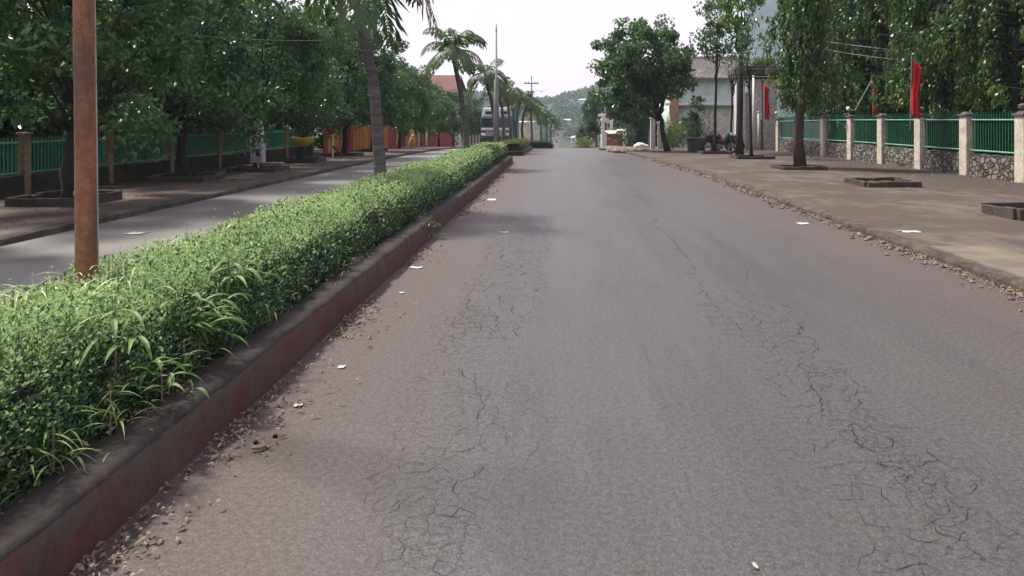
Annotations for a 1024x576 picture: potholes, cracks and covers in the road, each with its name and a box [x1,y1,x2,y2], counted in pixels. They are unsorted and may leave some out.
crack [352,347,547,575]
crack [430,211,556,355]
crack [664,232,1024,575]
